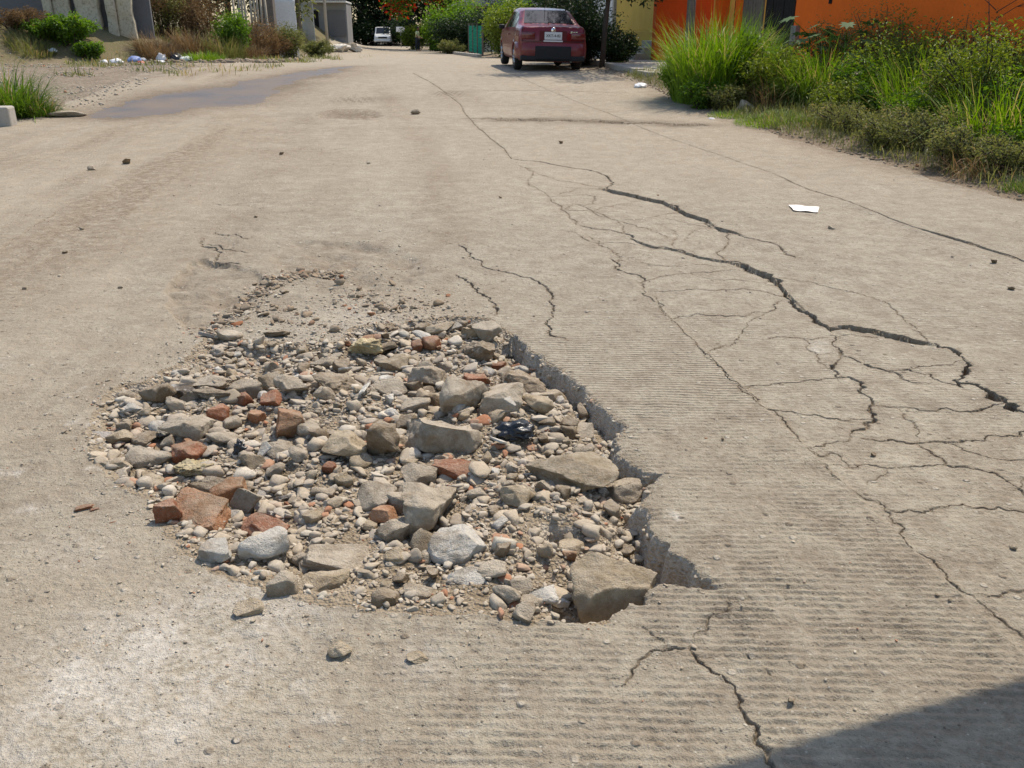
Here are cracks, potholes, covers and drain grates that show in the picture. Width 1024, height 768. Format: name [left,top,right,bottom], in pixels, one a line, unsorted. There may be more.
pothole [85,315,718,626]
crack [199,232,248,267]
crack [621,600,777,768]
crack [412,73,1024,638]
